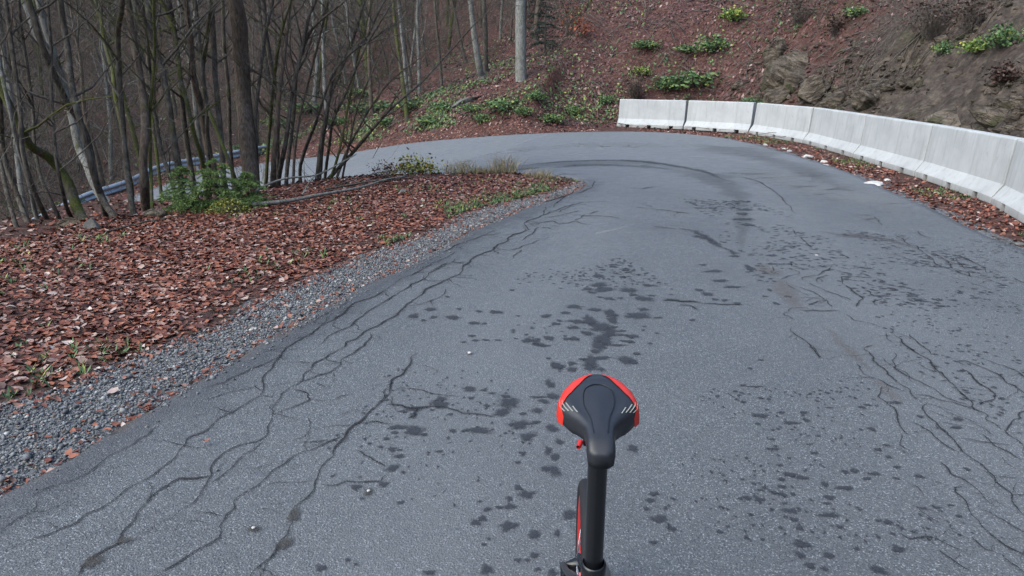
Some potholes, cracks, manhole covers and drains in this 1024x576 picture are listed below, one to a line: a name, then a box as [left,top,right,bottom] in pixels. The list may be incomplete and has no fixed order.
crack [770,230,1024,572]
crack [638,186,736,254]
crack [0,181,616,576]
crack [663,299,734,310]
crack [870,217,1024,287]
